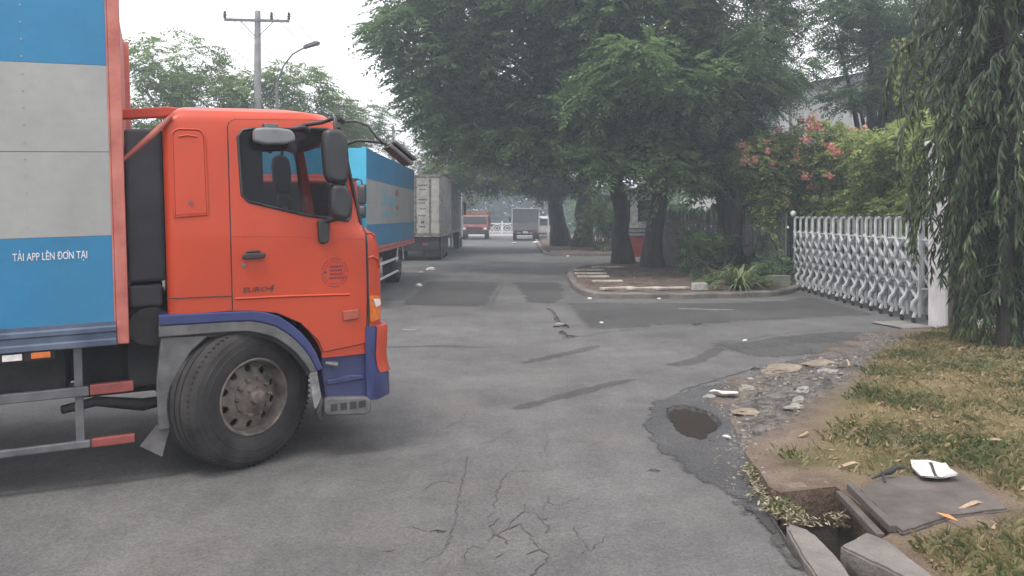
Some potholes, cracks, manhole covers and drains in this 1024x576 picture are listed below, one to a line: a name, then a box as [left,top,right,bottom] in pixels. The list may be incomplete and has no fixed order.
pothole [666,406,722,440]
crack [417,456,574,576]
